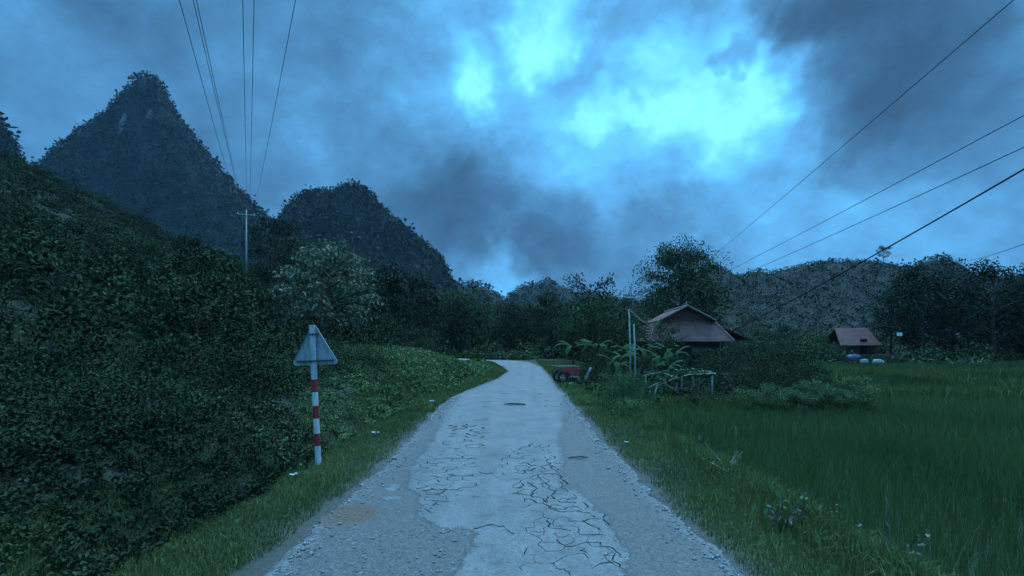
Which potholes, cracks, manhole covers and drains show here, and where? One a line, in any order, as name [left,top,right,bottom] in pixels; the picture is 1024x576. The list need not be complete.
crack [412,418,491,513]
crack [501,443,626,575]
